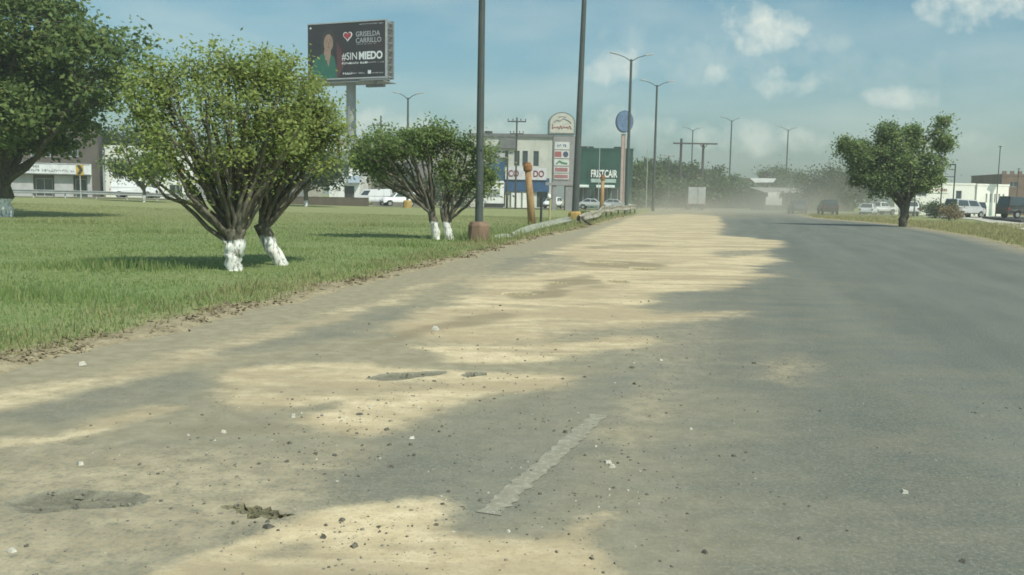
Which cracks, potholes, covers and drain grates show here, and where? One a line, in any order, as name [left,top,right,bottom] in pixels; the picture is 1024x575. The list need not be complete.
pothole [366,371,449,381]
pothole [4,488,151,514]
pothole [220,503,296,520]
